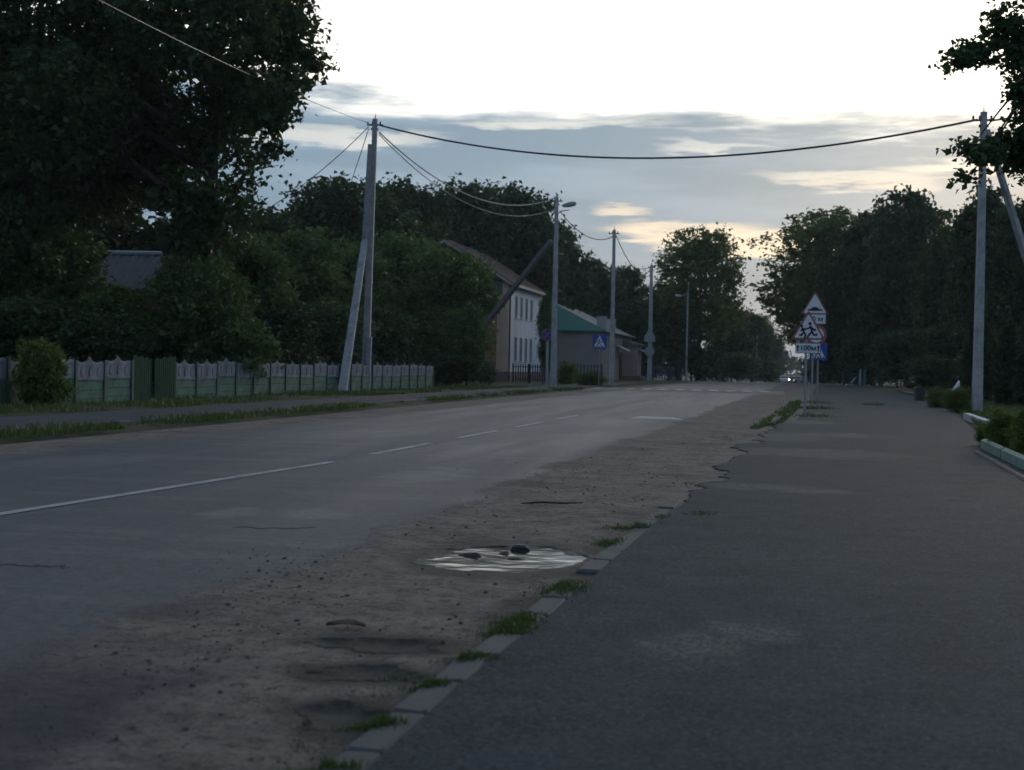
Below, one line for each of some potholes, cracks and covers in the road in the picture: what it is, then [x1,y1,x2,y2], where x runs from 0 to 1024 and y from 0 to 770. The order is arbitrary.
pothole [295,664,434,682]
pothole [409,544,594,574]
pothole [293,699,394,733]
pothole [304,637,446,655]
